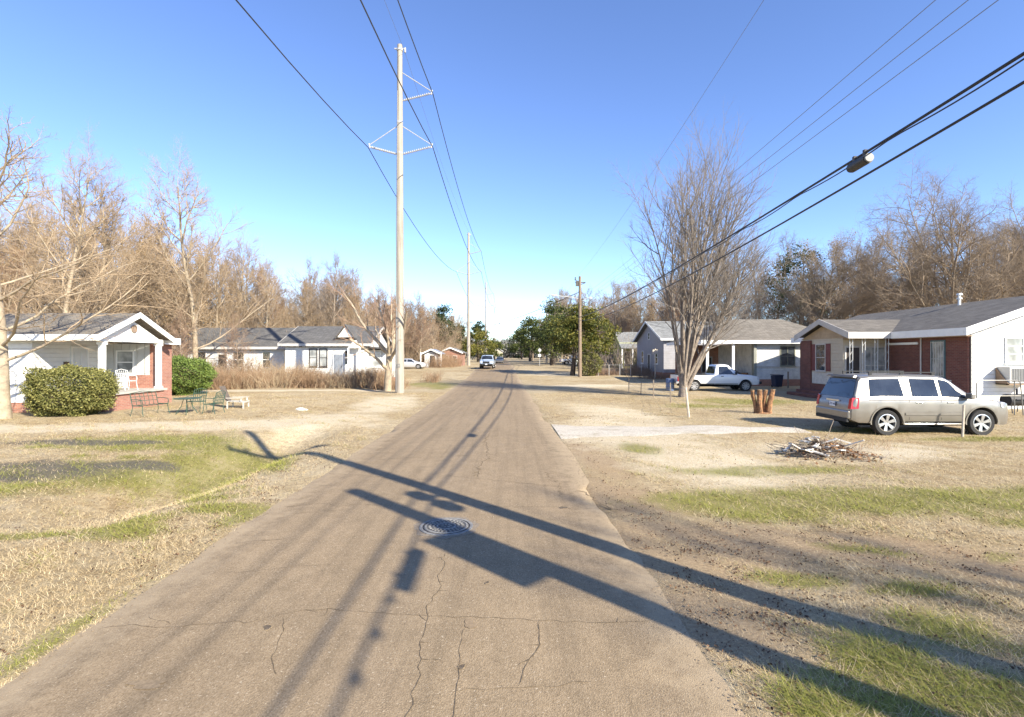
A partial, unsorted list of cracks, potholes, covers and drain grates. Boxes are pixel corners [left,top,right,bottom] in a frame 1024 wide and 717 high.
crack [109,554,649,717]
manhole cover [413,516,479,539]
